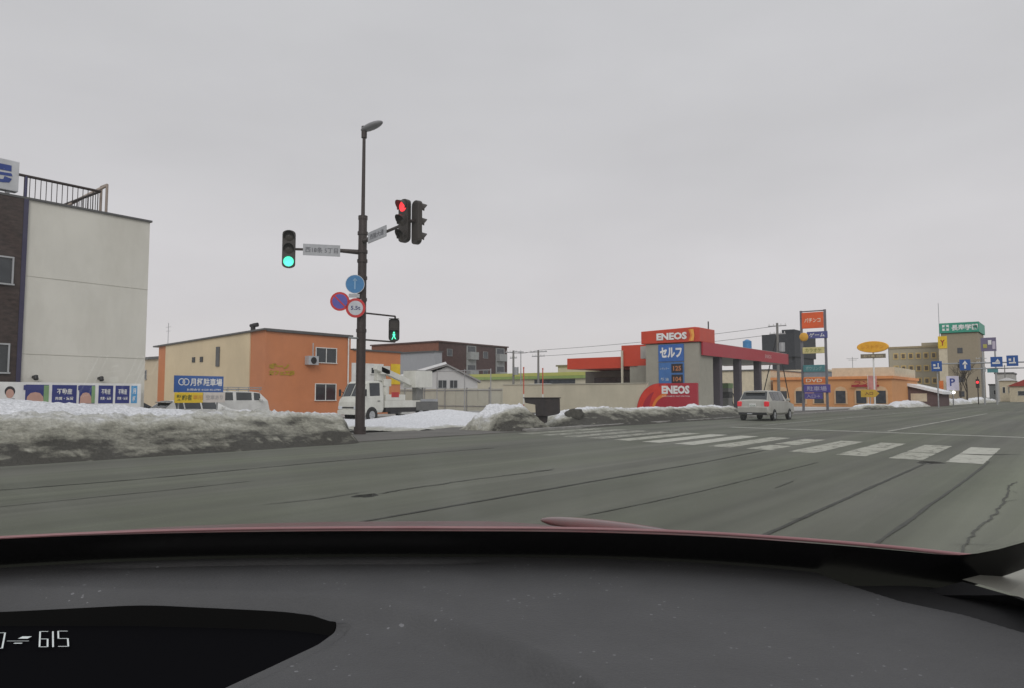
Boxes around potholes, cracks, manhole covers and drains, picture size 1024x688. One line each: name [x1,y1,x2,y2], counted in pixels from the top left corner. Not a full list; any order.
crack [586,454,1017,553]
